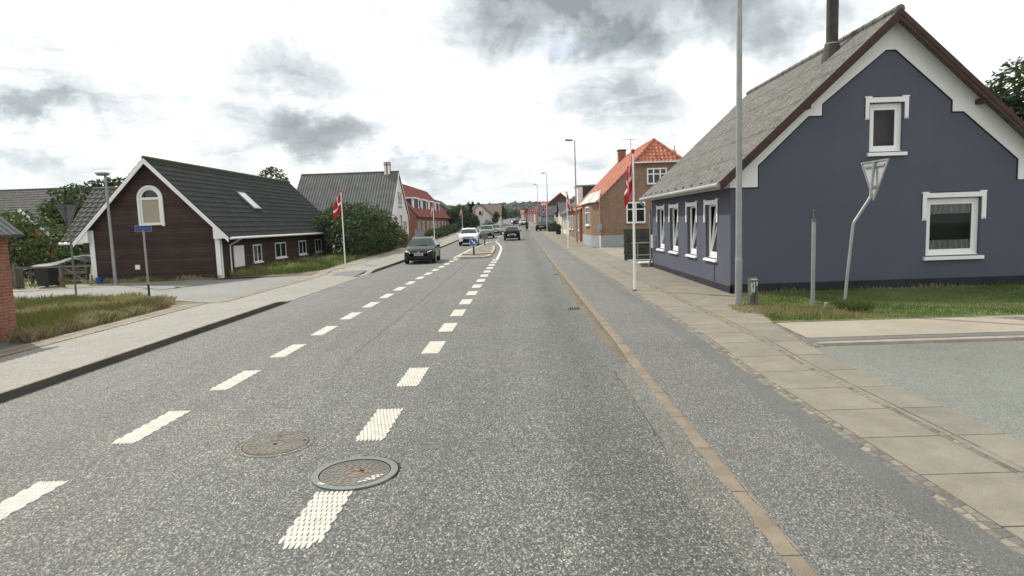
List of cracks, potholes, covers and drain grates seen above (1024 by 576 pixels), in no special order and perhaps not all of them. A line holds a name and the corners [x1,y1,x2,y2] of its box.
manhole cover [234,431,316,458]
manhole cover [311,455,402,491]
